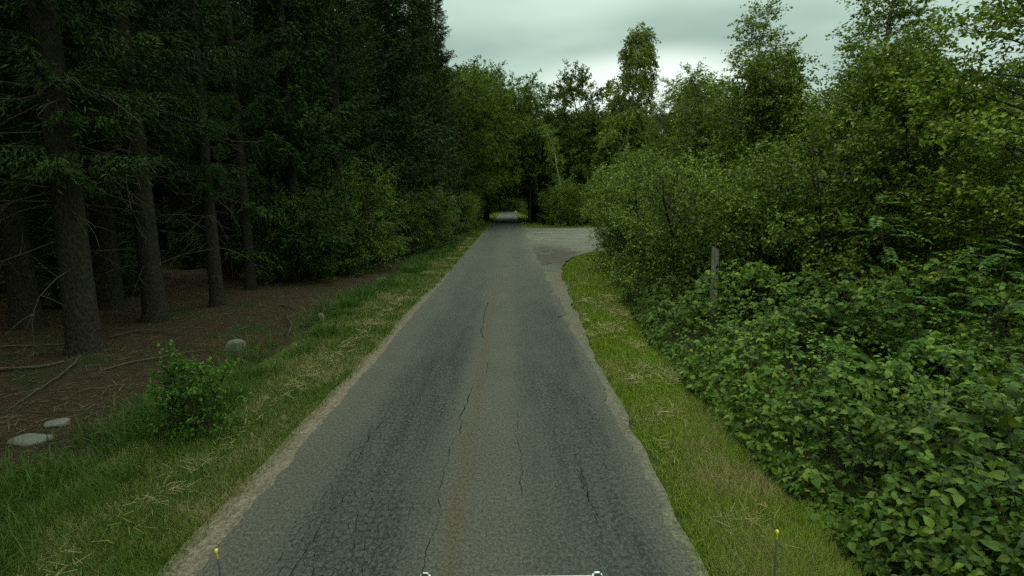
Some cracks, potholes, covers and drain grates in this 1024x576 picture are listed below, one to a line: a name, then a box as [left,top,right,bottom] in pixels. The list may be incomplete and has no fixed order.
crack [577,462,605,539]
crack [276,316,489,576]
